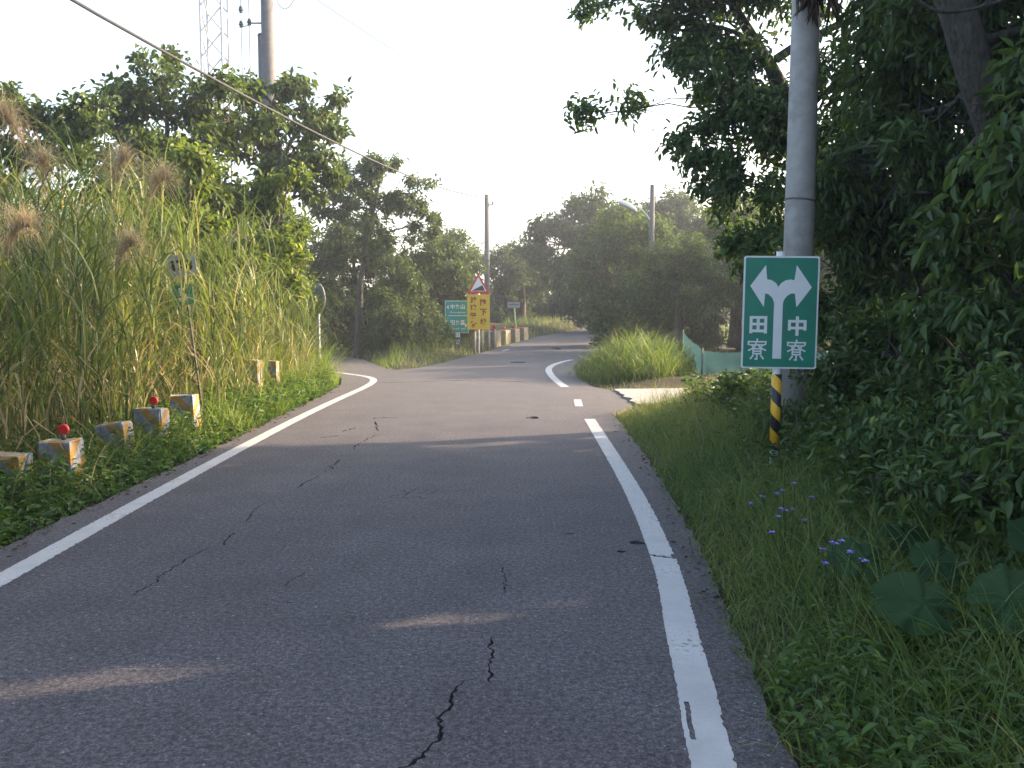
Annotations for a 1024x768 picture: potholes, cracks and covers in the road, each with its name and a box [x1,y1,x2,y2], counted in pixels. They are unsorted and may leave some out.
crack [487,639,495,685]
crack [131,417,385,597]
crack [398,679,468,768]
